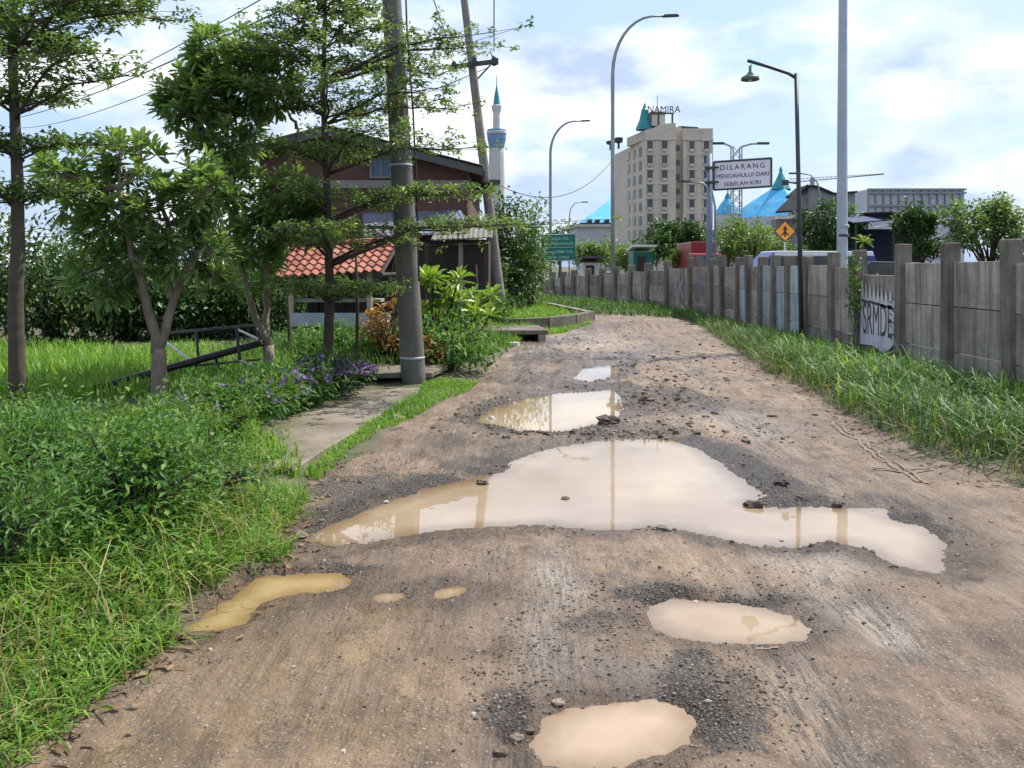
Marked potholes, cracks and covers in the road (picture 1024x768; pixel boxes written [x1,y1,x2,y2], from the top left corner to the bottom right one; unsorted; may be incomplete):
pothole [418,579,477,601]
pothole [439,385,643,435]
pothole [558,360,640,385]
pothole [362,587,414,603]
pothole [275,432,993,582]
crack [829,420,933,484]
pothole [163,563,372,650]
pothole [632,586,834,655]
pothole [512,685,720,768]
